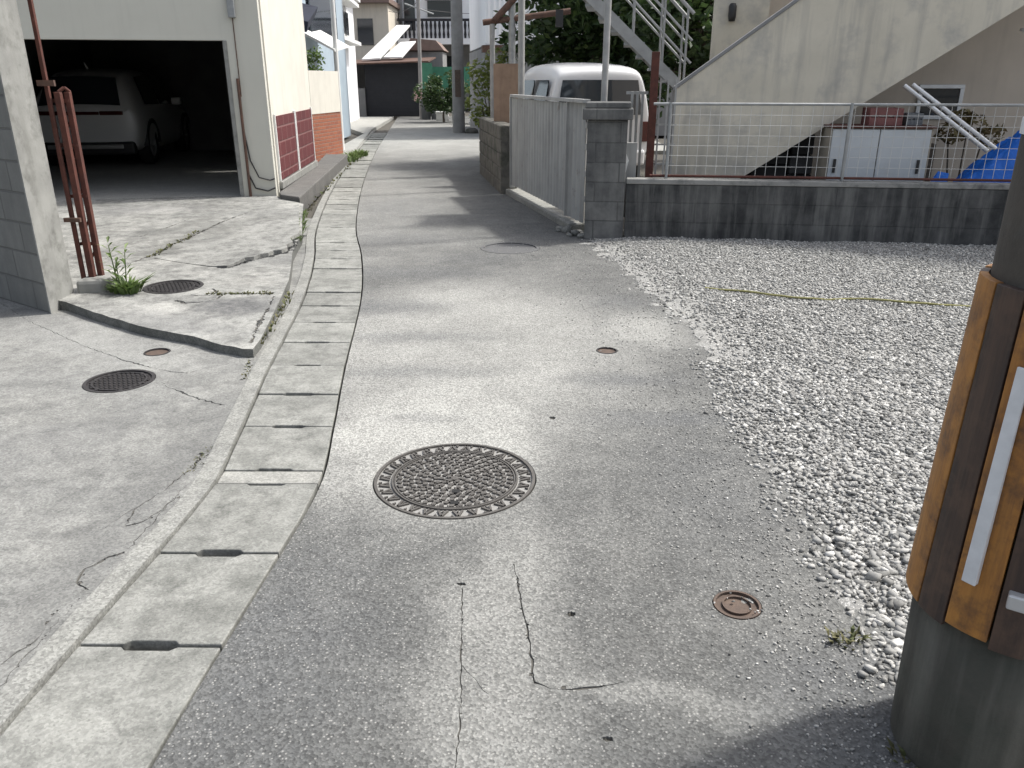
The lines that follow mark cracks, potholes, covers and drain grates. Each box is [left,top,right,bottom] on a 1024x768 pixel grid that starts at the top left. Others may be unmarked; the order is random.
crack [514,565,604,690]
manhole cover [82,369,156,393]
crack [23,454,203,659]
manhole cover [373,443,536,520]
utility cover [143,348,170,356]
crack [455,589,463,768]
manhole cover [142,280,203,294]
manhole cover [481,242,539,254]
utility cover [713,590,762,620]
